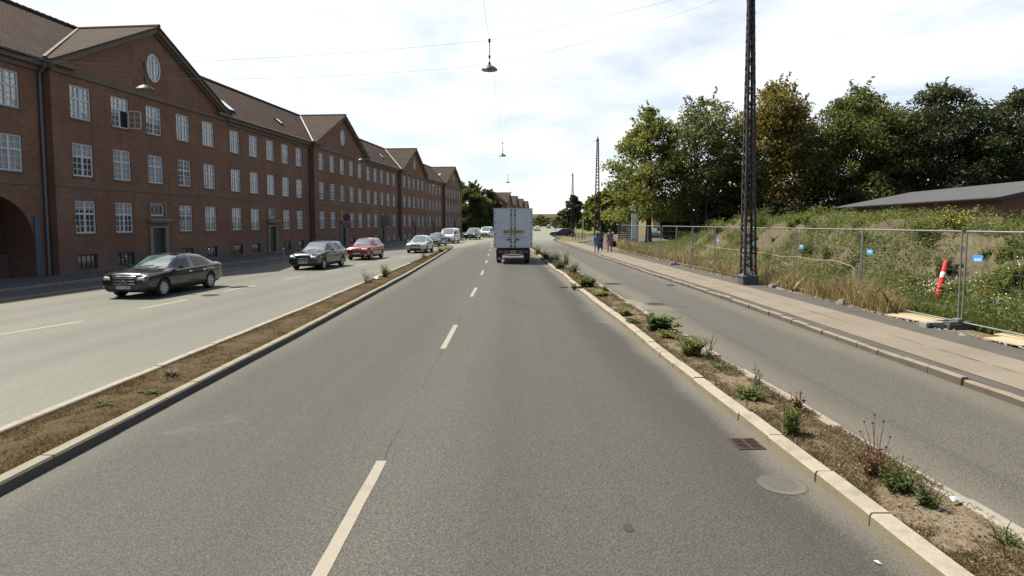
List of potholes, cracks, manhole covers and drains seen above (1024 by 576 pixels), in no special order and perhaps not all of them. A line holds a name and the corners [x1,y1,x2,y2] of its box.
manhole cover [756,474,809,495]
drain grate [728,438,767,450]
